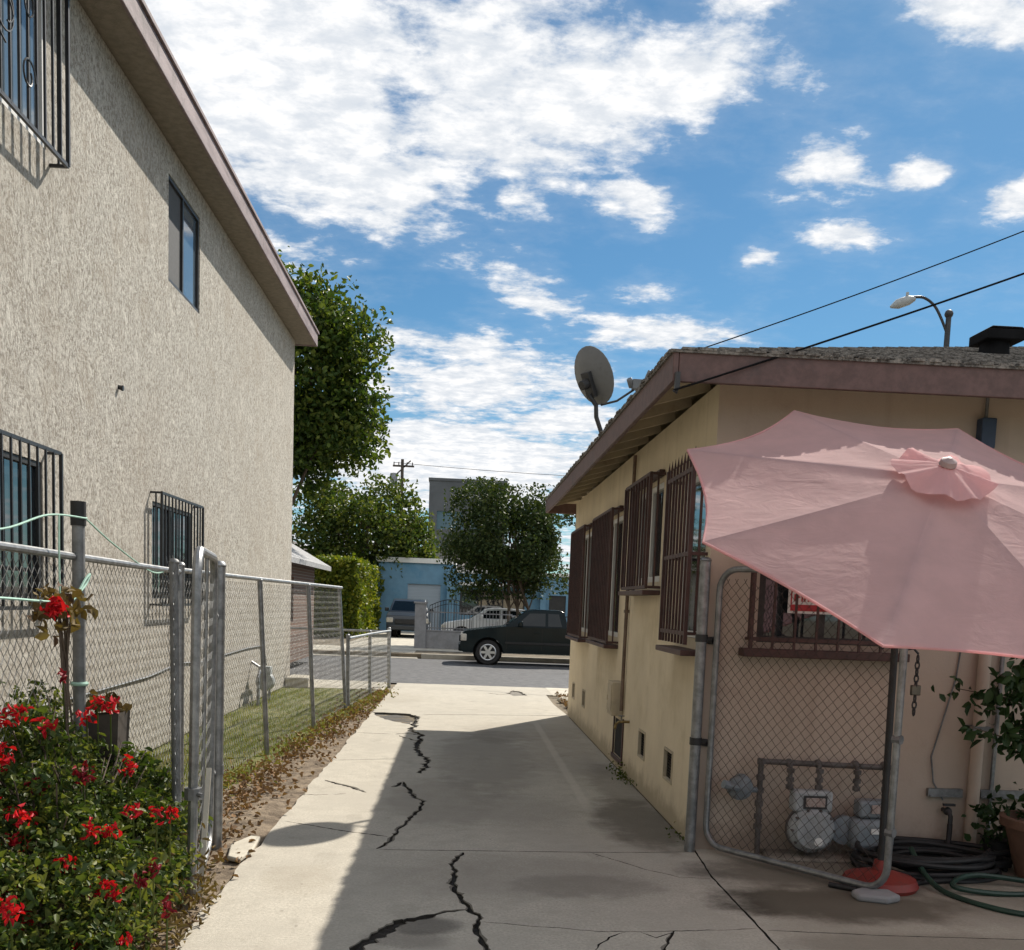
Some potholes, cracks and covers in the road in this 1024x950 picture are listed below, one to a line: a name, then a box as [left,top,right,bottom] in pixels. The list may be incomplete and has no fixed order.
crack [287,715,756,950]
